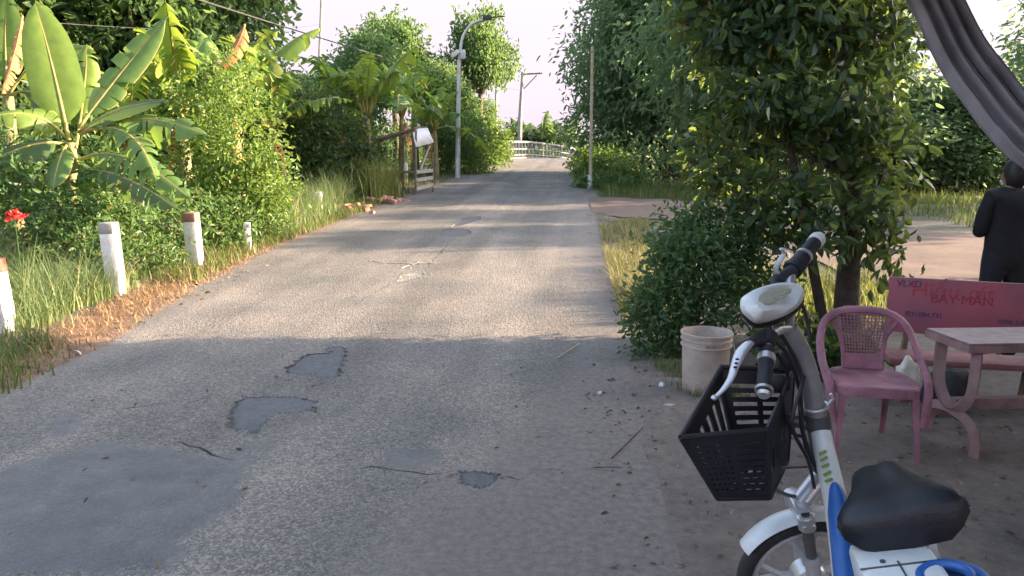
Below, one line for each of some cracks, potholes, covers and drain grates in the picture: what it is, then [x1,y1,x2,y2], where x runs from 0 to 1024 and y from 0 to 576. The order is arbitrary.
crack [343,466,448,475]
crack [164,441,232,460]
pothole [225,395,319,435]
pothole [455,470,504,489]
pothole [284,346,350,378]
crack [369,244,448,269]
